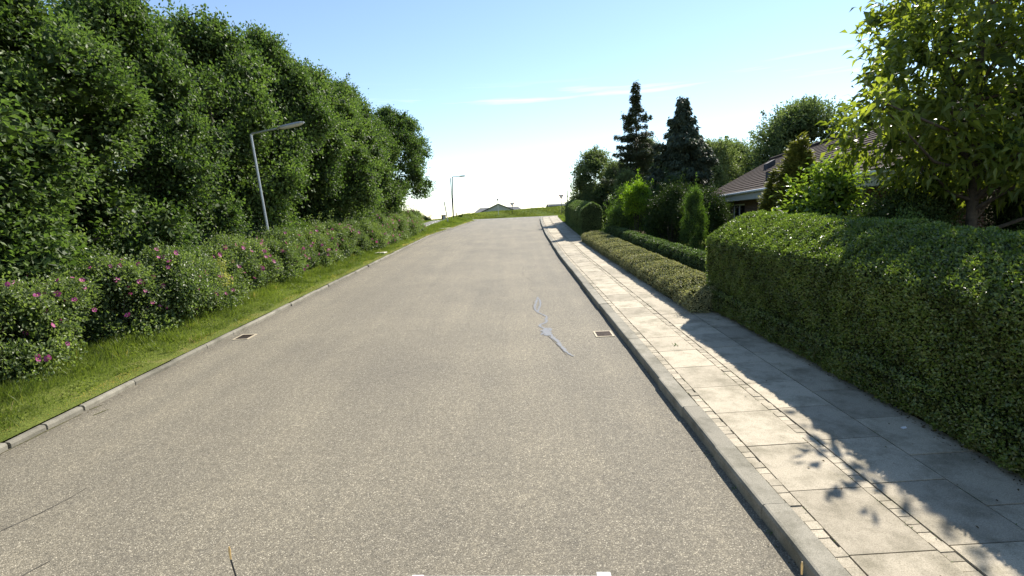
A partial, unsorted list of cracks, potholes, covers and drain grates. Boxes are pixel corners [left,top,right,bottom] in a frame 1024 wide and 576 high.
crack [523,266,573,356]
crack [1,488,86,531]
